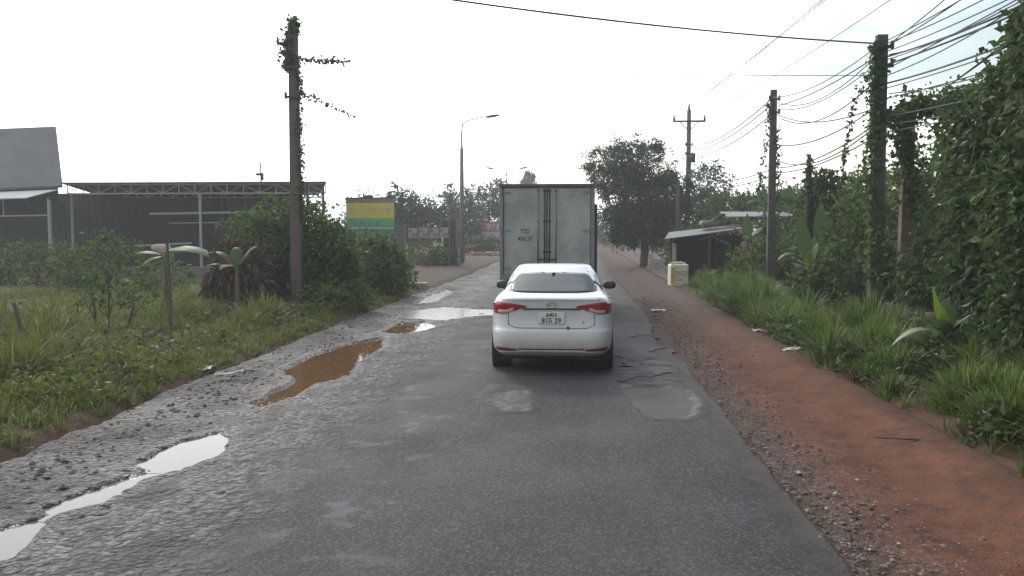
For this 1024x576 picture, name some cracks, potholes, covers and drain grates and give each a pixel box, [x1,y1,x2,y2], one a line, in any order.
crack [613,334,687,384]
pothole [0,514,78,573]
pothole [372,320,449,336]
pothole [234,335,393,410]
pothole [109,426,247,474]
pothole [15,469,195,522]
